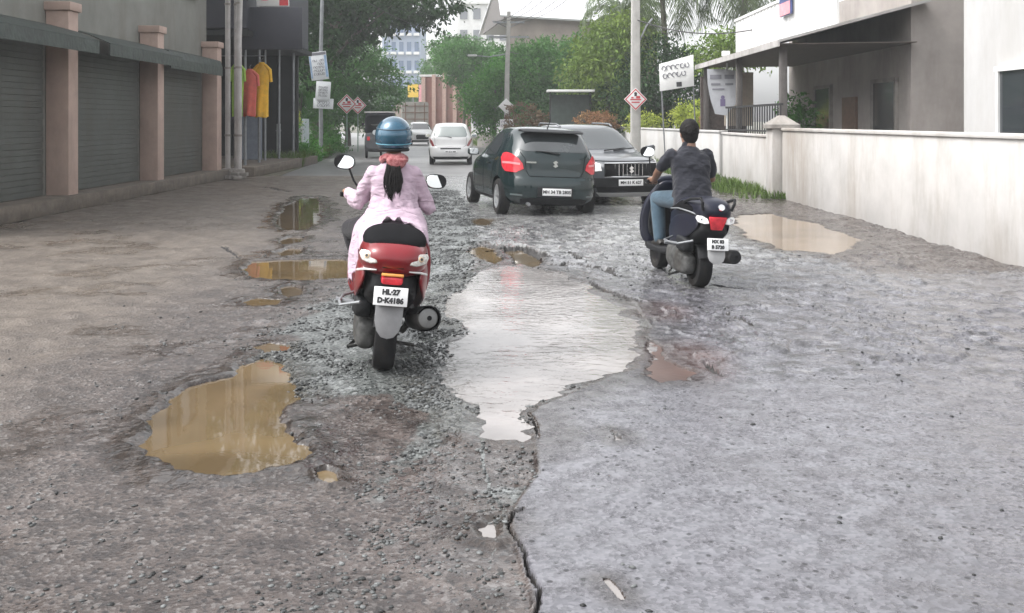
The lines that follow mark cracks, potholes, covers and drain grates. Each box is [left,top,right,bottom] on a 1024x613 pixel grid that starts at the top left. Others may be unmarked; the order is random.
crack [506,506,542,613]
pothole [503,249,544,267]
pothole [272,196,328,230]
pothole [126,354,320,476]
pothole [241,297,286,306]
pothole [239,256,348,280]
pothole [314,464,342,483]
pothole [426,264,658,444]
pothole [641,336,699,383]
pothole [463,244,505,265]
